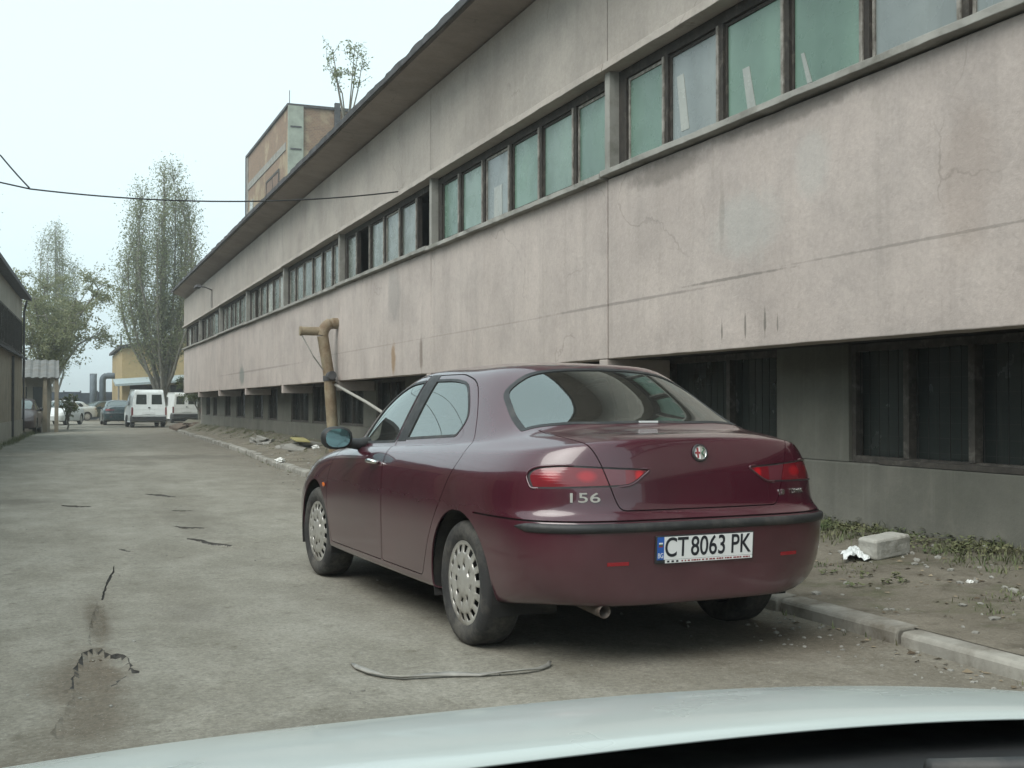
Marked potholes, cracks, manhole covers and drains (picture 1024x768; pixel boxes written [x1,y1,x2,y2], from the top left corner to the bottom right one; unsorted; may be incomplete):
pothole [50,600,140,741]
crack [101,567,114,600]
